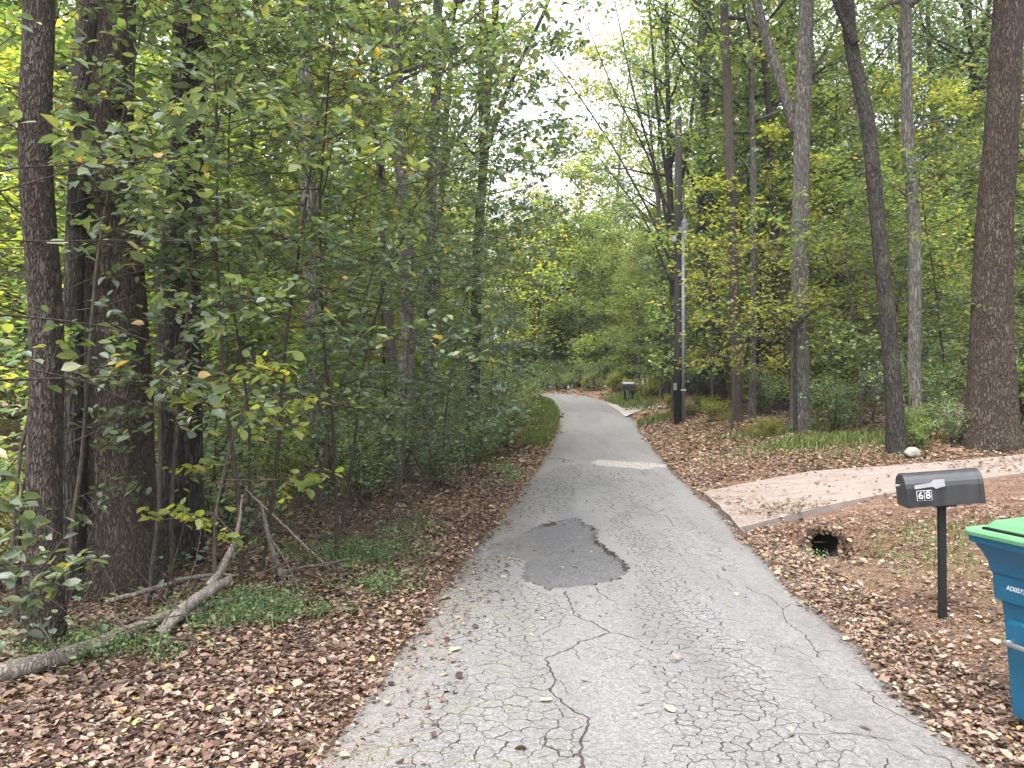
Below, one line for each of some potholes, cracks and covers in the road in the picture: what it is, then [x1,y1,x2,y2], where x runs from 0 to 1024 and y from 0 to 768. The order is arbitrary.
crack [342,557,647,768]
crack [605,512,961,768]
crack [498,458,683,535]
